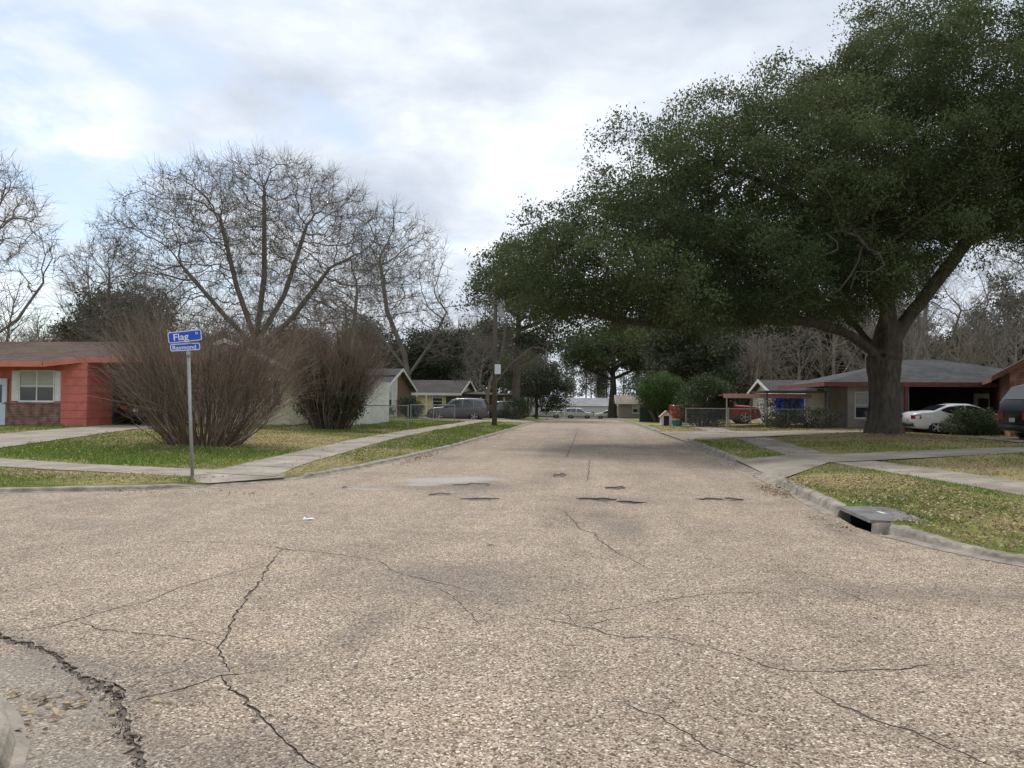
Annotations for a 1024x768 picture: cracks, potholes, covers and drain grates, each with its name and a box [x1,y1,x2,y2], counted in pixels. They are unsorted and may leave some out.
crack [813,689,1024,768]
crack [0,542,480,768]
crack [528,592,960,673]
crack [564,512,645,567]
drain grate [835,506,934,535]
crack [608,701,756,768]
